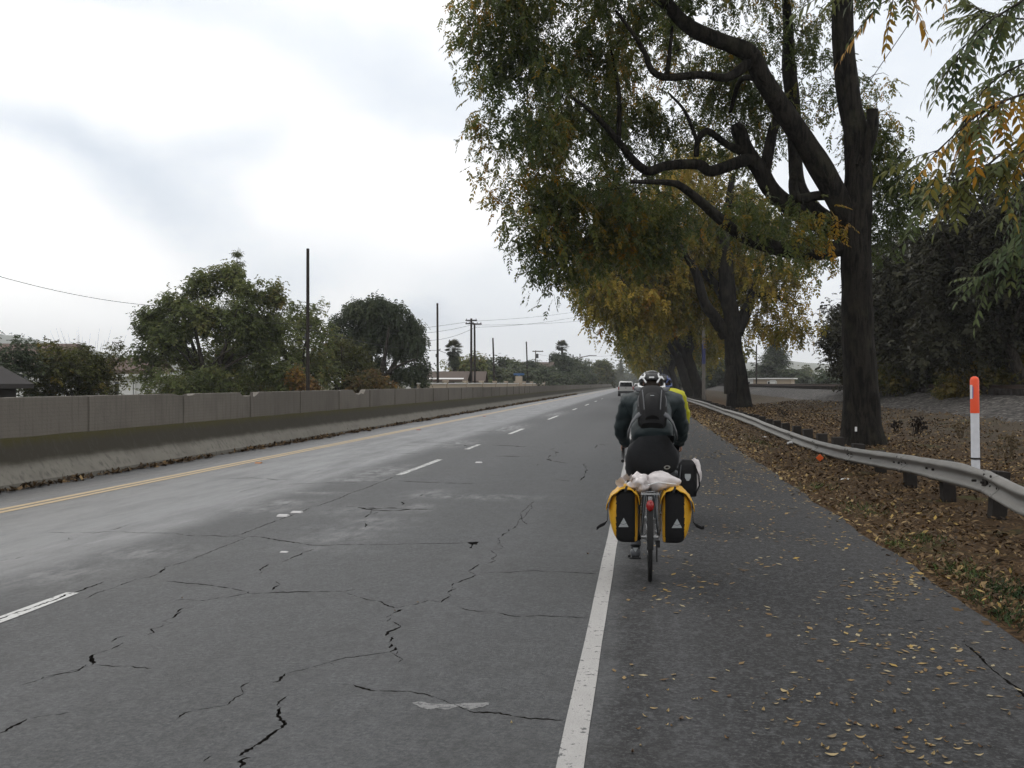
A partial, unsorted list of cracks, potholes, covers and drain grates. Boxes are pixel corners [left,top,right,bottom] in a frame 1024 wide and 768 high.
crack [965,644,1024,697]
crack [1,470,593,768]
